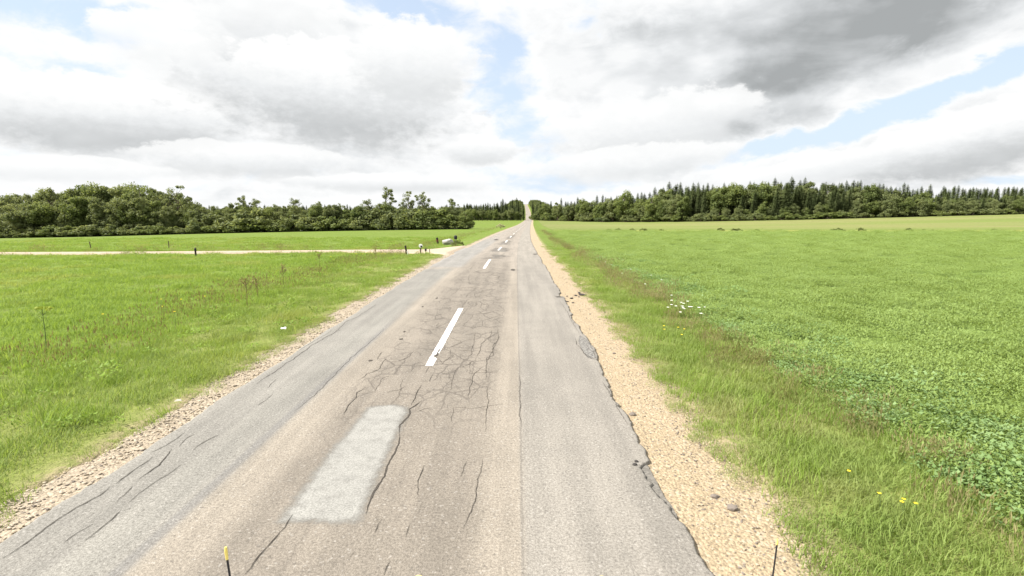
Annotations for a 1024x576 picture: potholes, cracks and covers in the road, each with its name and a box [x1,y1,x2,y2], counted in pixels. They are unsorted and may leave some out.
crack [3,434,217,558]
crack [345,255,504,534]
pothole [641,464,677,518]
